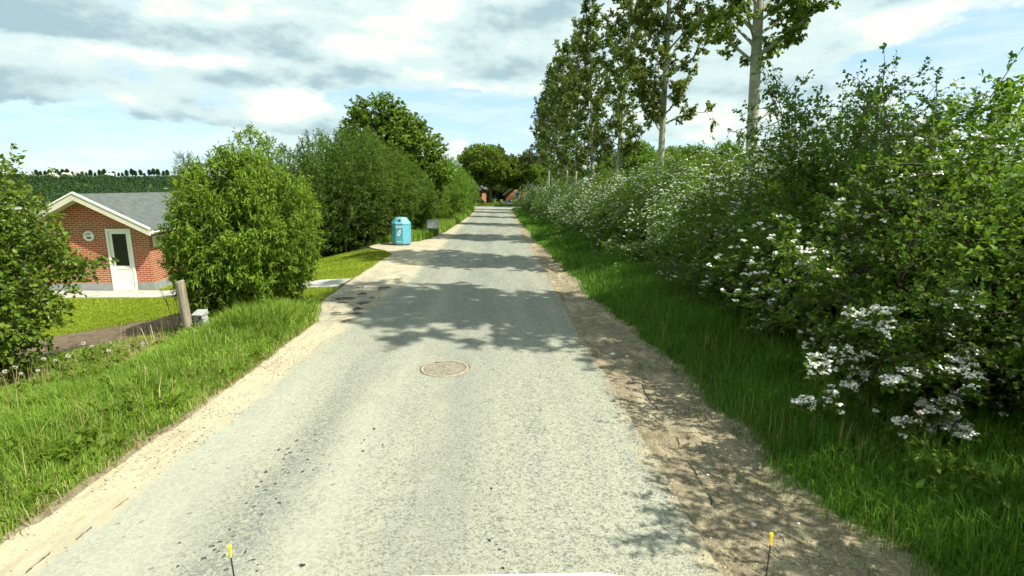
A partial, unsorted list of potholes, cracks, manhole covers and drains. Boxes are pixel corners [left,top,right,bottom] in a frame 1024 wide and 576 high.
manhole cover [420,360,470,377]
